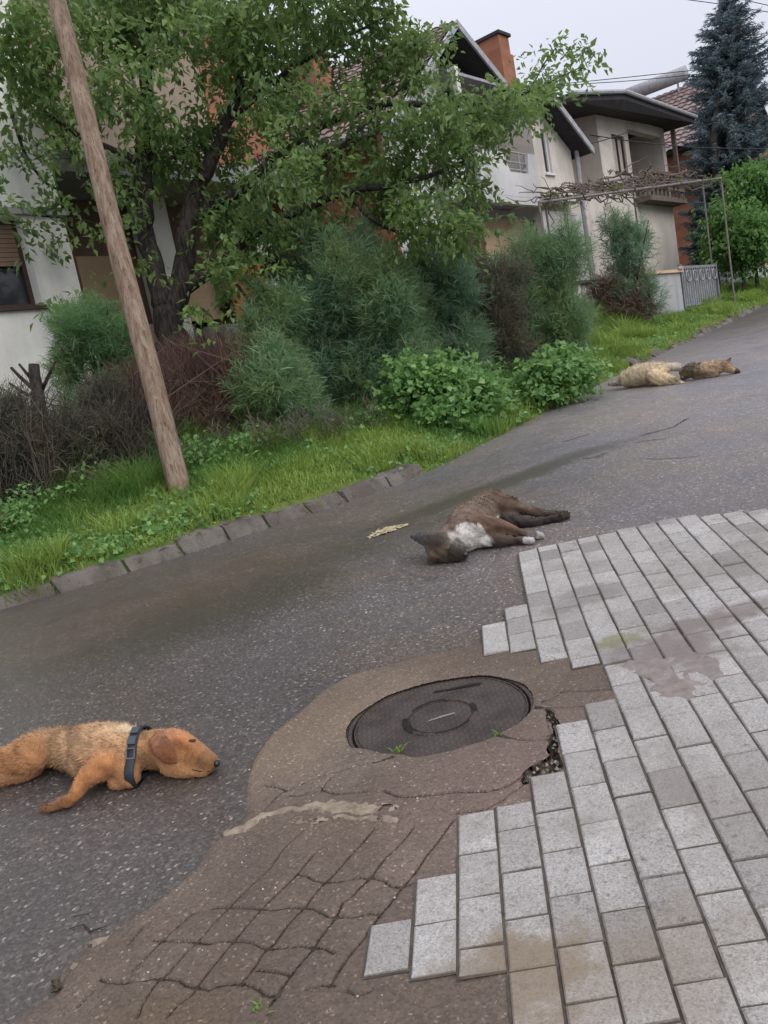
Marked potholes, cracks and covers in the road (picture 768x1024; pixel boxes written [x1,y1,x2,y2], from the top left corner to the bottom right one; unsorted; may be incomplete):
manhole cover [346,675,534,757]
crack [80,821,454,1019]
crack [635,417,699,459]
crack [263,756,394,806]
pothole [521,707,563,785]
